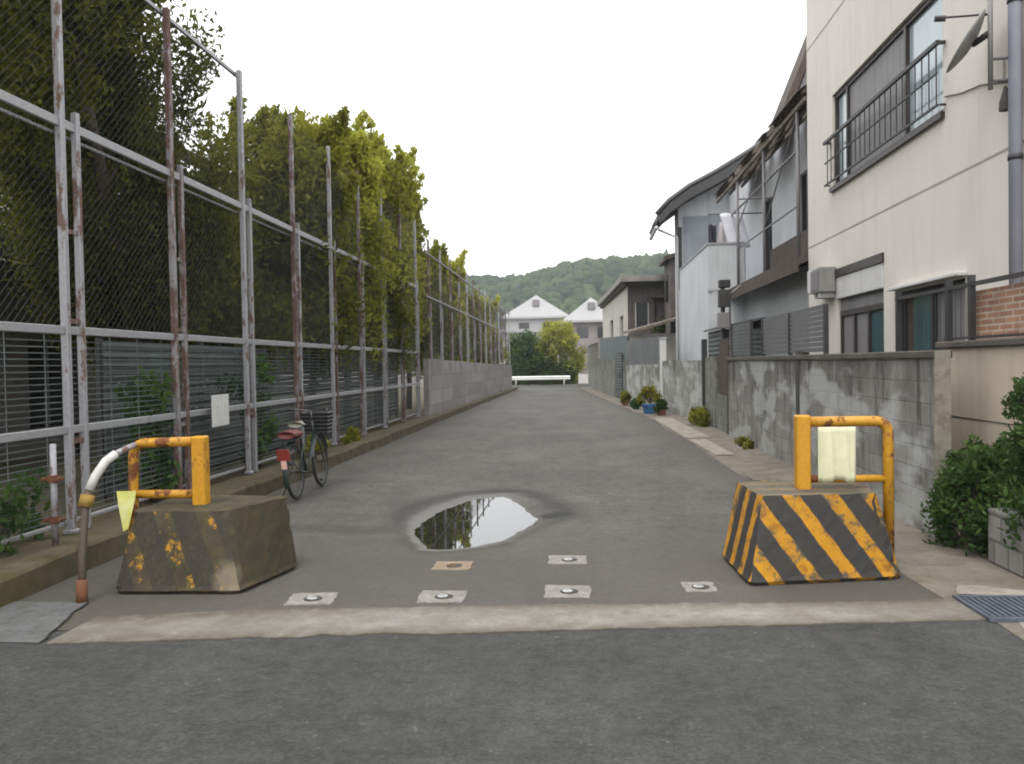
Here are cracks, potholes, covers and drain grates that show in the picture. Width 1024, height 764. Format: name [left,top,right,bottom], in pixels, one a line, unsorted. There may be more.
drain grate [952,595,1024,623]
